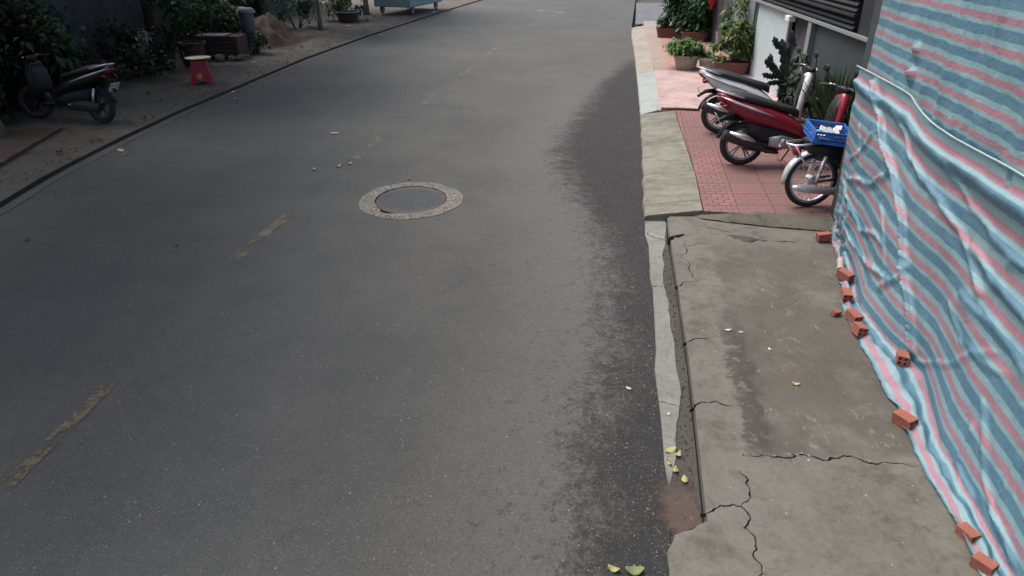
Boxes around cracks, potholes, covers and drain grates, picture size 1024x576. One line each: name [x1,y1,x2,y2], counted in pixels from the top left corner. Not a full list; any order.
crack [647,233,694,277]
crack [700,475,763,576]
manhole cover [358,182,463,220]
crack [754,454,898,465]
